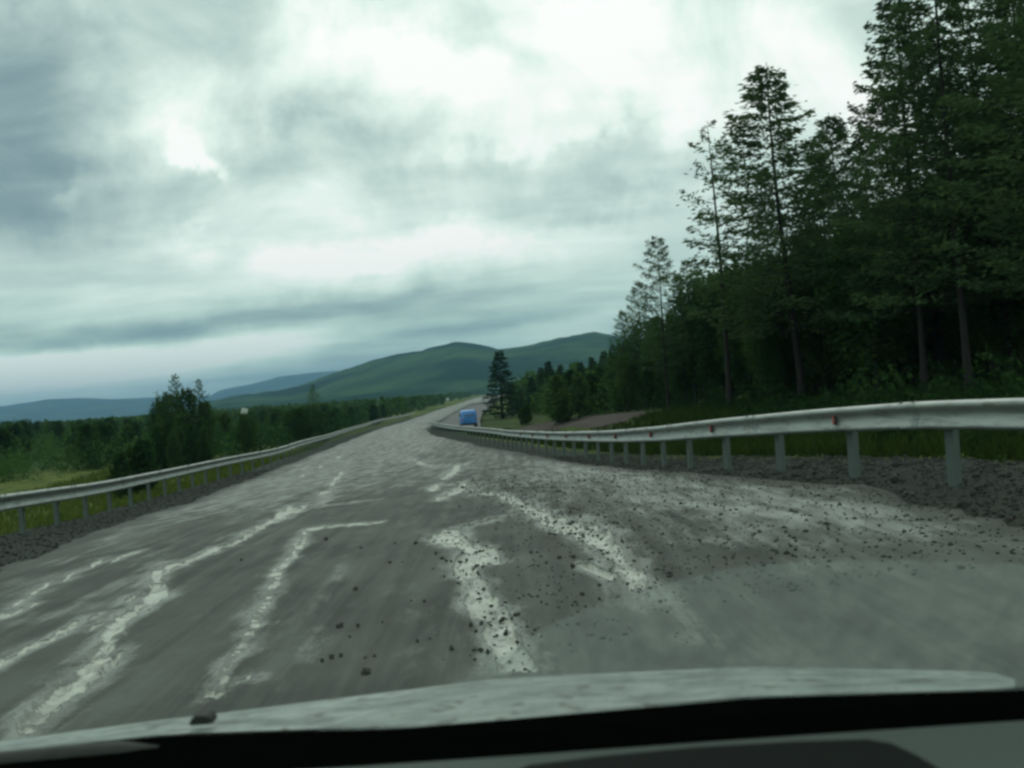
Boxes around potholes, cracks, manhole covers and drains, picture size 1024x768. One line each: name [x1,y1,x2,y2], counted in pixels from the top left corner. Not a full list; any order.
crack [0,456,386,736]
crack [426,491,648,673]
